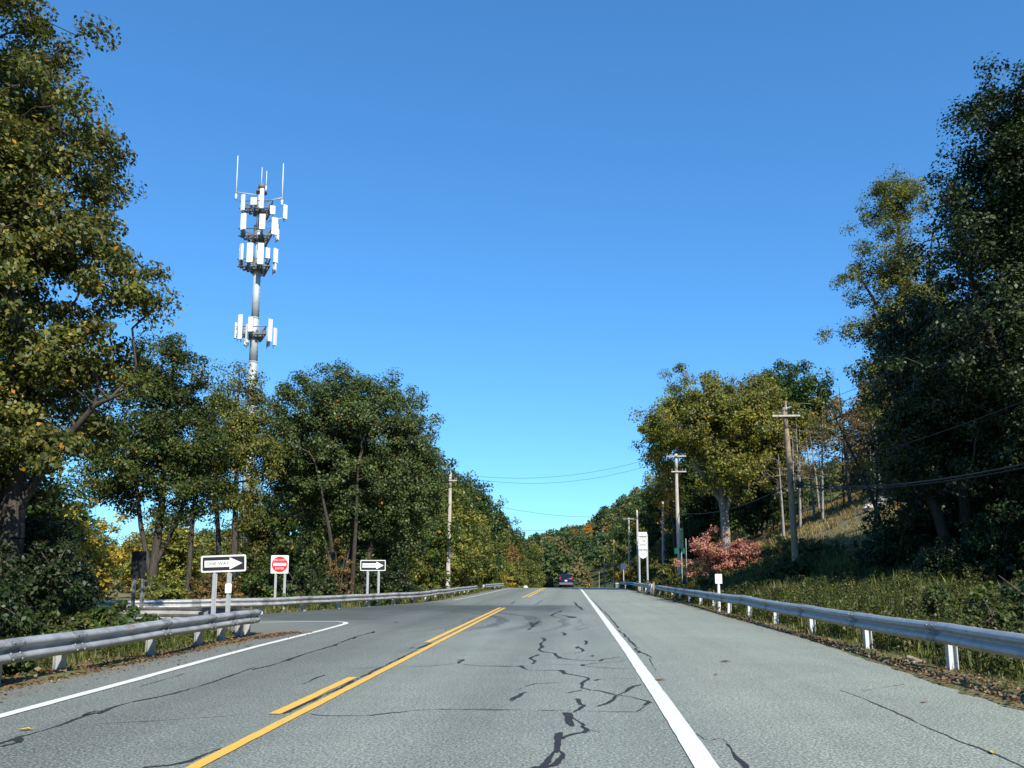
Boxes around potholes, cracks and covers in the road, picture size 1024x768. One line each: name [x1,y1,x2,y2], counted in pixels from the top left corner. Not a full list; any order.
crack [0,601,656,768]
crack [844,684,1024,768]
